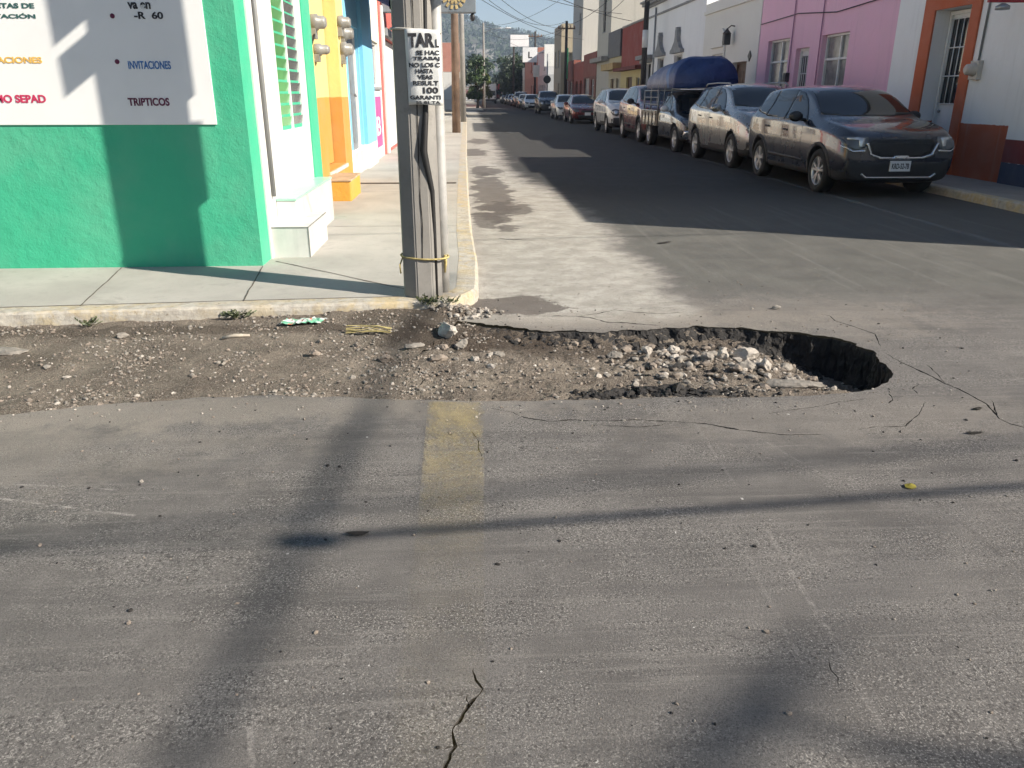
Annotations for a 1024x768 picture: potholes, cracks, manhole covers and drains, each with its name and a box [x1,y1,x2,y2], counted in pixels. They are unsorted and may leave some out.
crack [830,316,1021,430]
crack [443,668,483,768]
crack [491,408,821,435]
pothole [415,323,893,401]
